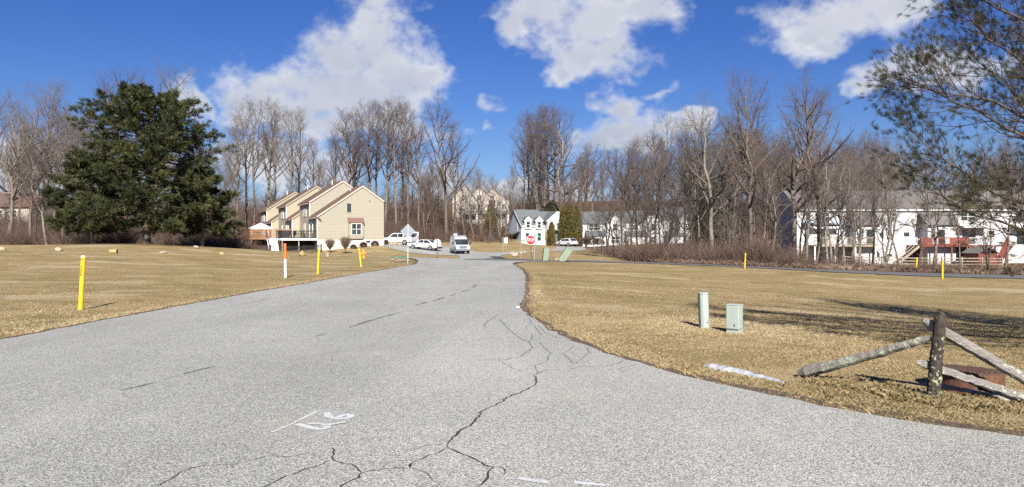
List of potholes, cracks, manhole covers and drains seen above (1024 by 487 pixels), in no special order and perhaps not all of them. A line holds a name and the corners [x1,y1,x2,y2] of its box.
crack [121,269,478,391]
crack [155,314,623,487]
